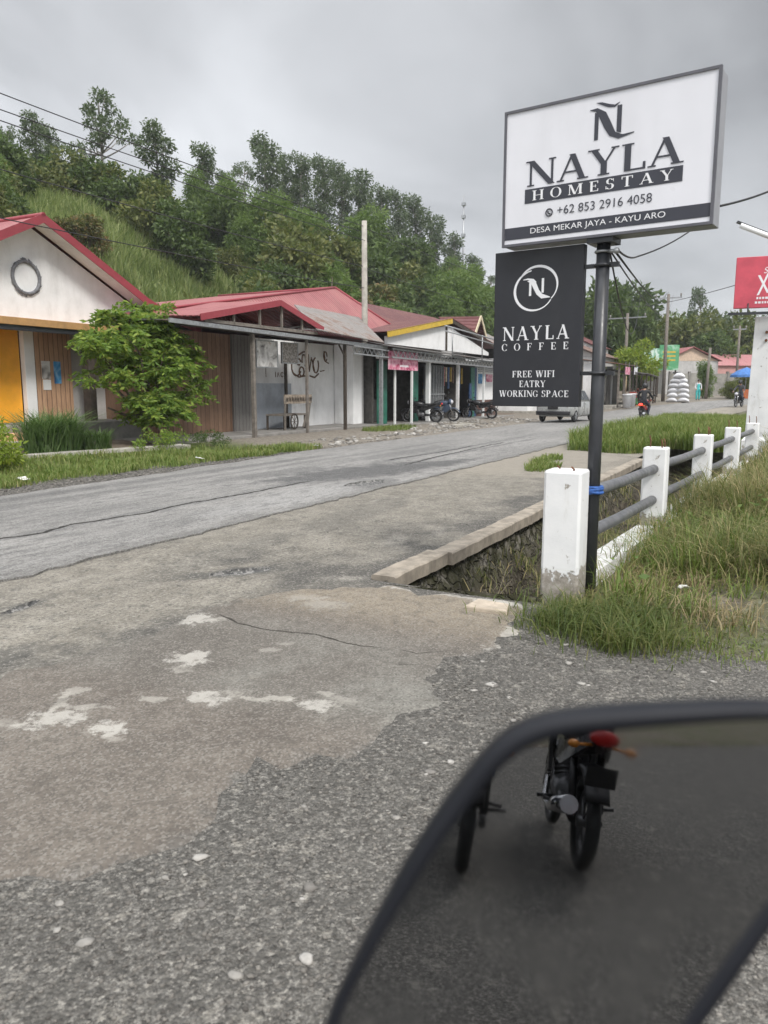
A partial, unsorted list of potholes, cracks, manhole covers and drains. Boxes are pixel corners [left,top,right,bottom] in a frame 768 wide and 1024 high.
crack [0,481,310,539]
crack [220,614,444,665]
pothole [208,567,270,576]
